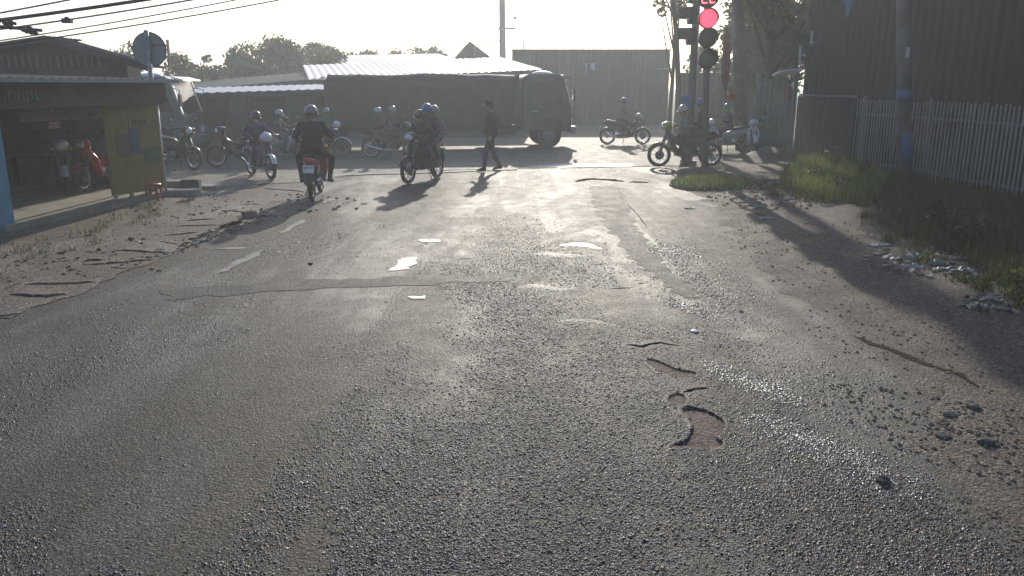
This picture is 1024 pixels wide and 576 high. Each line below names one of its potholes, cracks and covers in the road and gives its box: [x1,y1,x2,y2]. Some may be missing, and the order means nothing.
pothole [644,357,700,379]
crack [625,338,680,348]
crack [854,336,980,388]
pothole [664,391,692,407]
pothole [666,405,731,452]
crack [0,188,306,318]
